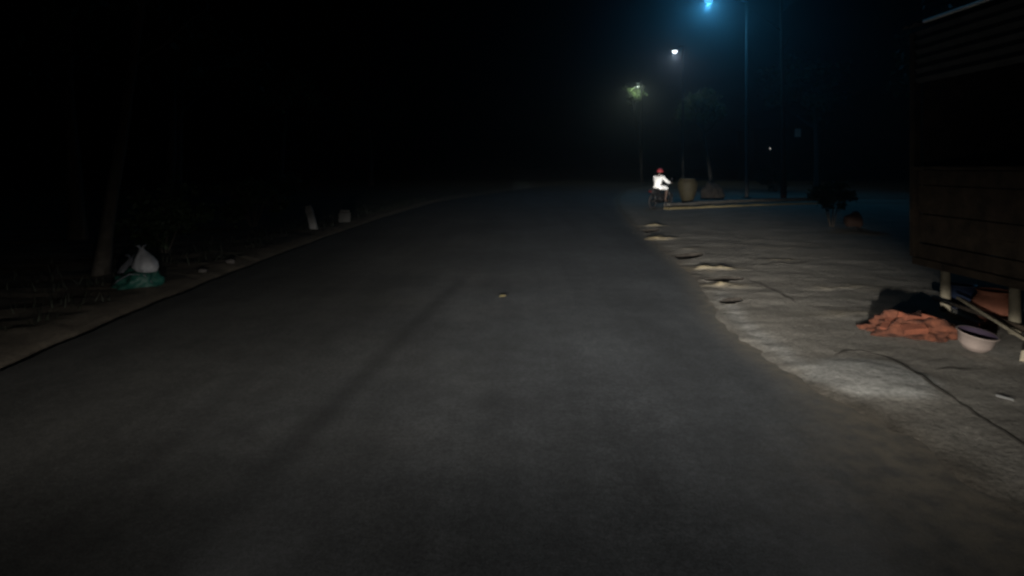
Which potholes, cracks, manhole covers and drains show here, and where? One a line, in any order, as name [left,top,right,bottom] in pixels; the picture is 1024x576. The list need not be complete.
crack [836,350,1024,446]
pothole [718,297,745,305]
crack [745,262,805,303]
